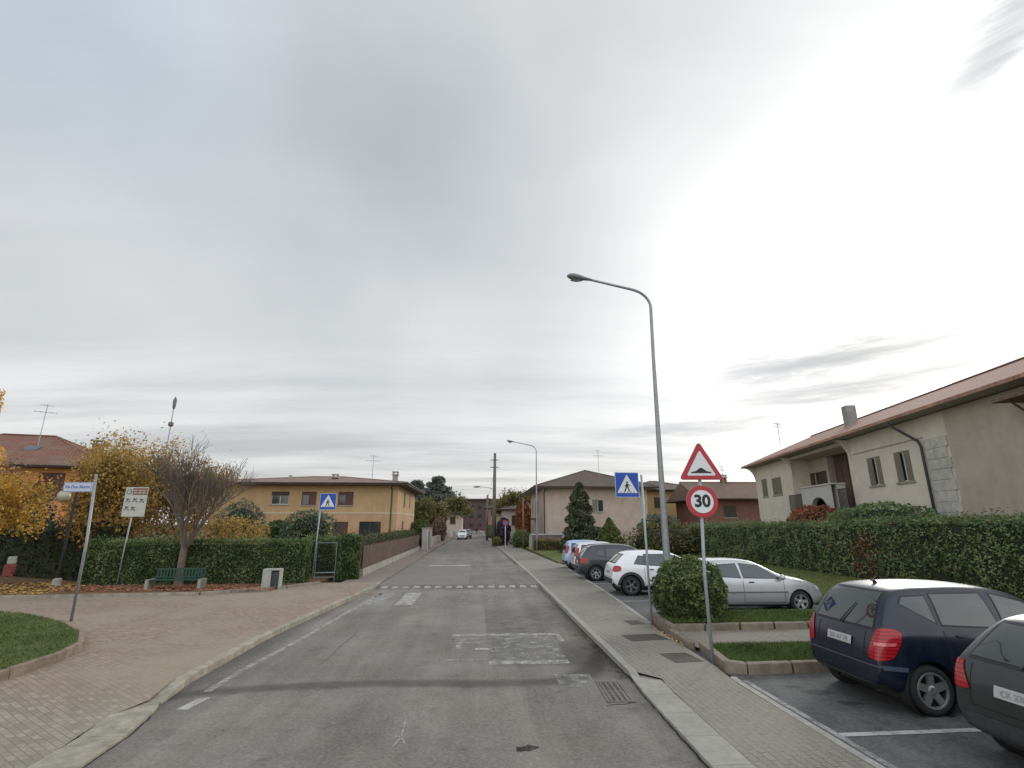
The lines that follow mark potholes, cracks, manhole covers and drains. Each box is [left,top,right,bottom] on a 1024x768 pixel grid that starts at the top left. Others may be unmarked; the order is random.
manhole cover [660,652,704,663]
drain grate [595,681,635,702]
